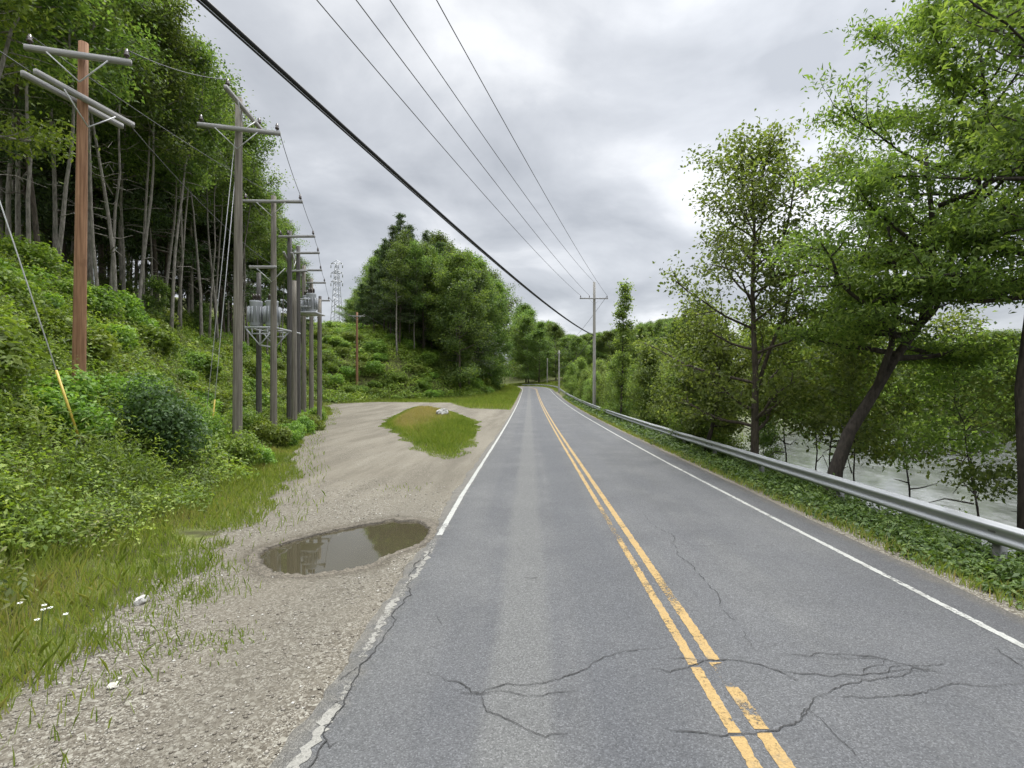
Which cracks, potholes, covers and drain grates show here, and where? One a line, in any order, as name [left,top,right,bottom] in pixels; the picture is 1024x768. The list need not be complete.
pothole [243,517,439,579]
crack [308,540,432,768]
crack [426,648,794,737]
crack [647,518,773,645]
crack [670,647,1023,755]
